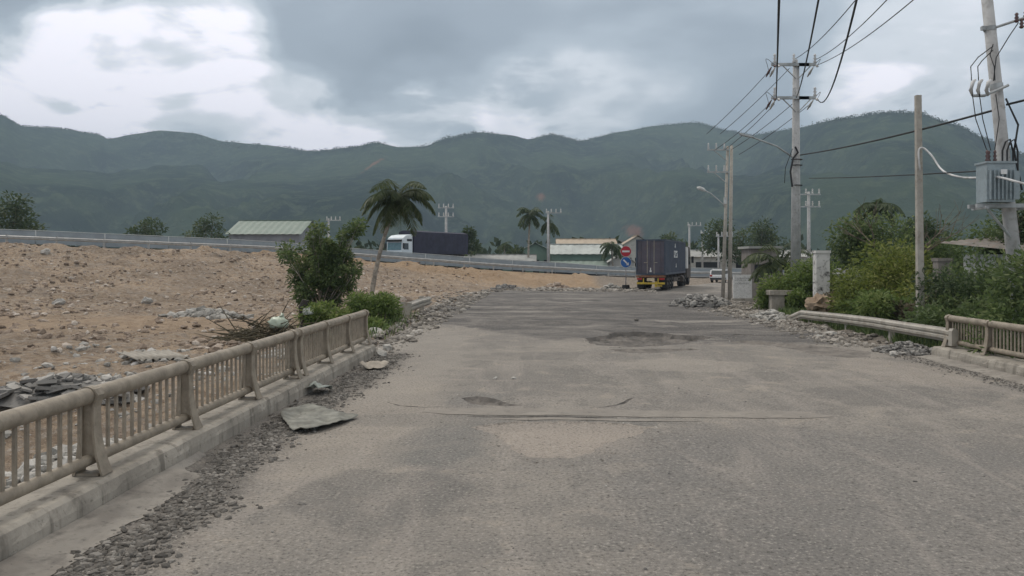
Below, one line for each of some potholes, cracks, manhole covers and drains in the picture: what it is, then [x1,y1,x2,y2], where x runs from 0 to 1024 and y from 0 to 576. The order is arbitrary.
pothole [584,332,713,347]
pothole [462,396,522,406]
crack [605,397,635,407]
